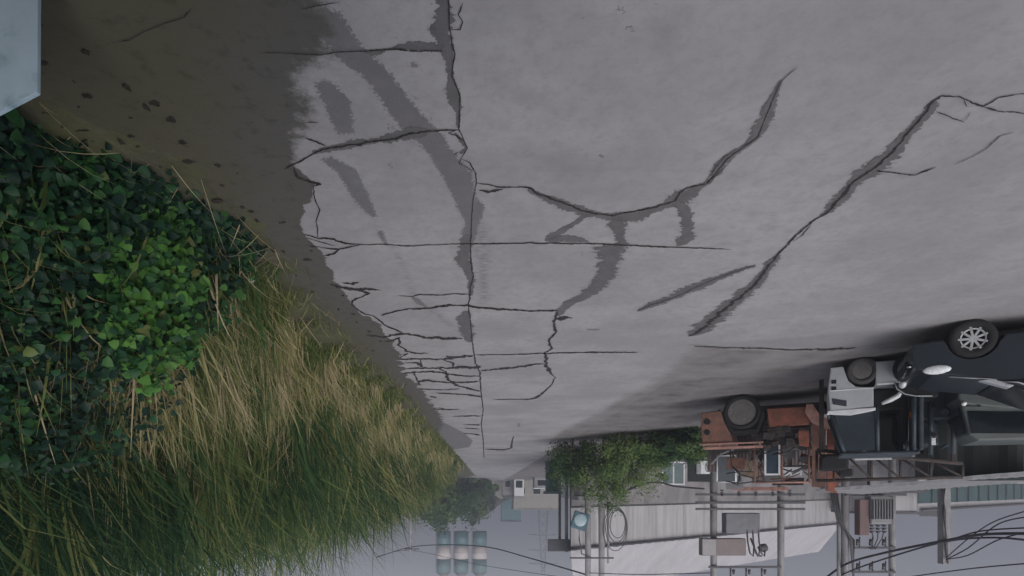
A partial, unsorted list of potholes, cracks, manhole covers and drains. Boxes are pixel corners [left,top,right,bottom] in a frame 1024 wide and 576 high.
crack [118,8,192,42]
crack [267,0,1024,455]
